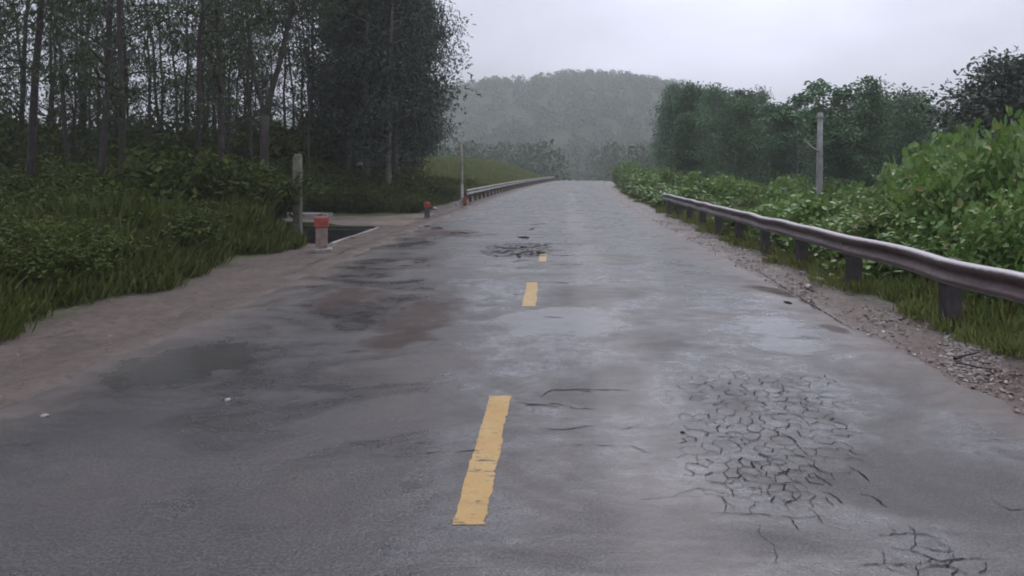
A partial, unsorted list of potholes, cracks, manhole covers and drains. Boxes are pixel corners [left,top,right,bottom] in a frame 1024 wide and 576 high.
crack [858,525,998,576]
crack [514,389,646,452]
crack [649,368,889,567]
